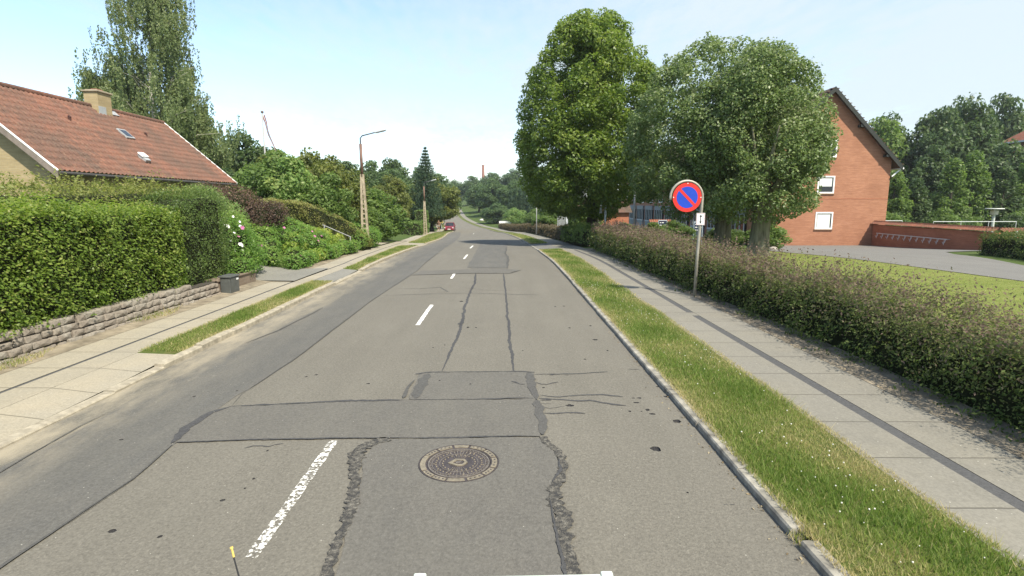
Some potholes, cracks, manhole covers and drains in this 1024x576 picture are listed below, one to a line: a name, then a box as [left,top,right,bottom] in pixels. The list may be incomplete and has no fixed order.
crack [320,438,393,576]
crack [512,372,624,414]
manhole cover [418,444,499,483]
crack [539,436,582,575]
